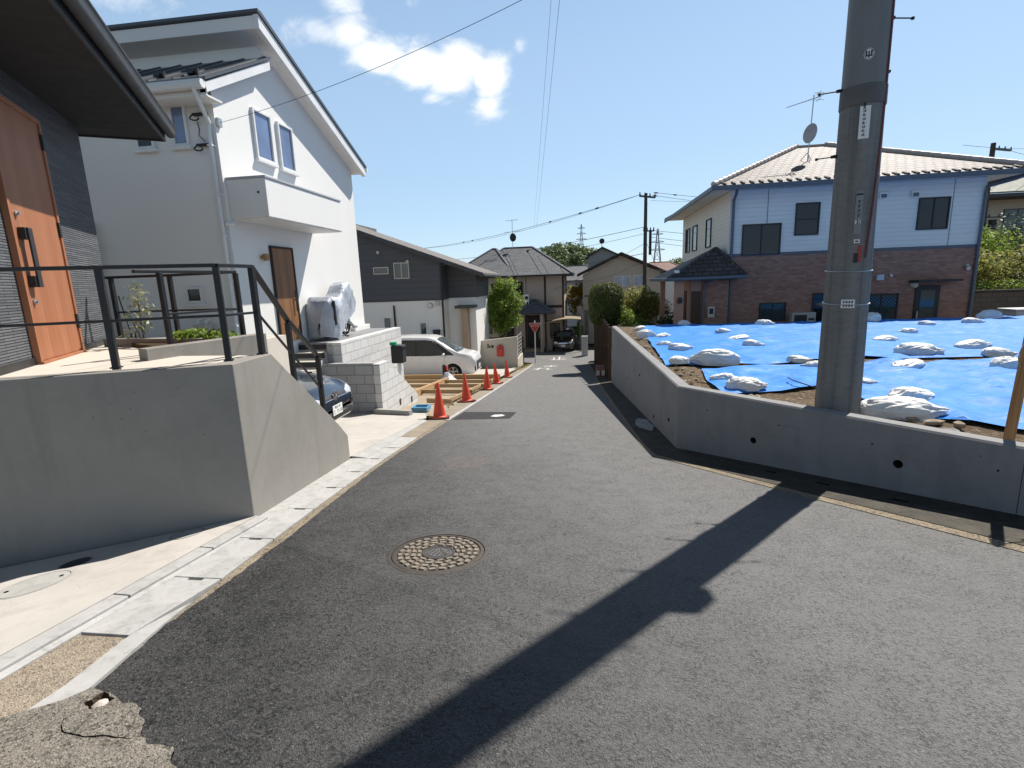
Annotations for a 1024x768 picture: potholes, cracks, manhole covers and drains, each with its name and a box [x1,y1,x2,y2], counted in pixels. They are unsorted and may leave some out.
manhole cover [387,533,488,575]
utility cover [0,569,74,600]
crack [60,718,131,739]
pothole [84,692,115,709]
